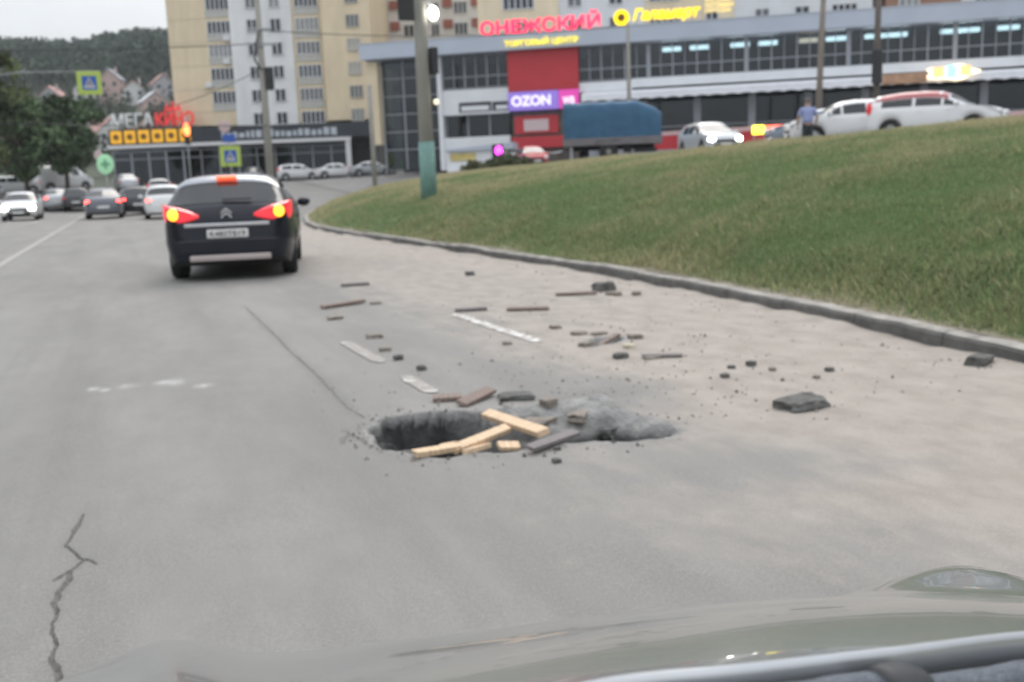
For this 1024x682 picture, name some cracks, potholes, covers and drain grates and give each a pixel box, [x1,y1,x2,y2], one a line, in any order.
crack [243,306,384,453]
crack [47,513,98,682]
pothole [361,394,686,459]
